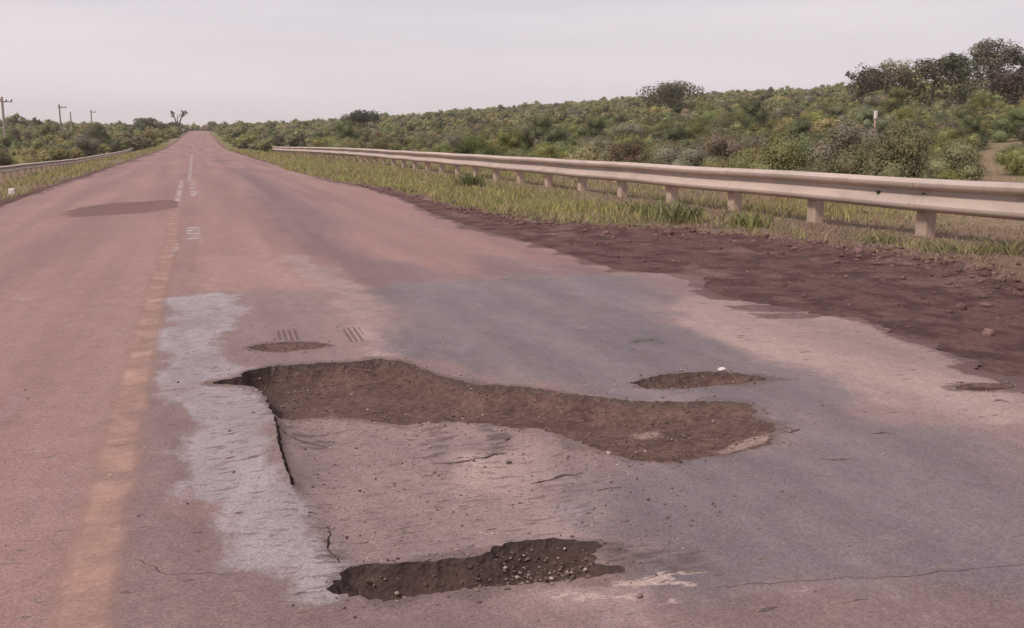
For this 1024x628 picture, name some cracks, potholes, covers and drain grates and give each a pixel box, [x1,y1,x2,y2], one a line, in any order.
pothole [213,359,776,463]
crack [308,511,341,563]
pothole [247,342,333,352]
pothole [326,538,625,601]
crack [274,416,327,486]
crack [139,559,233,575]
